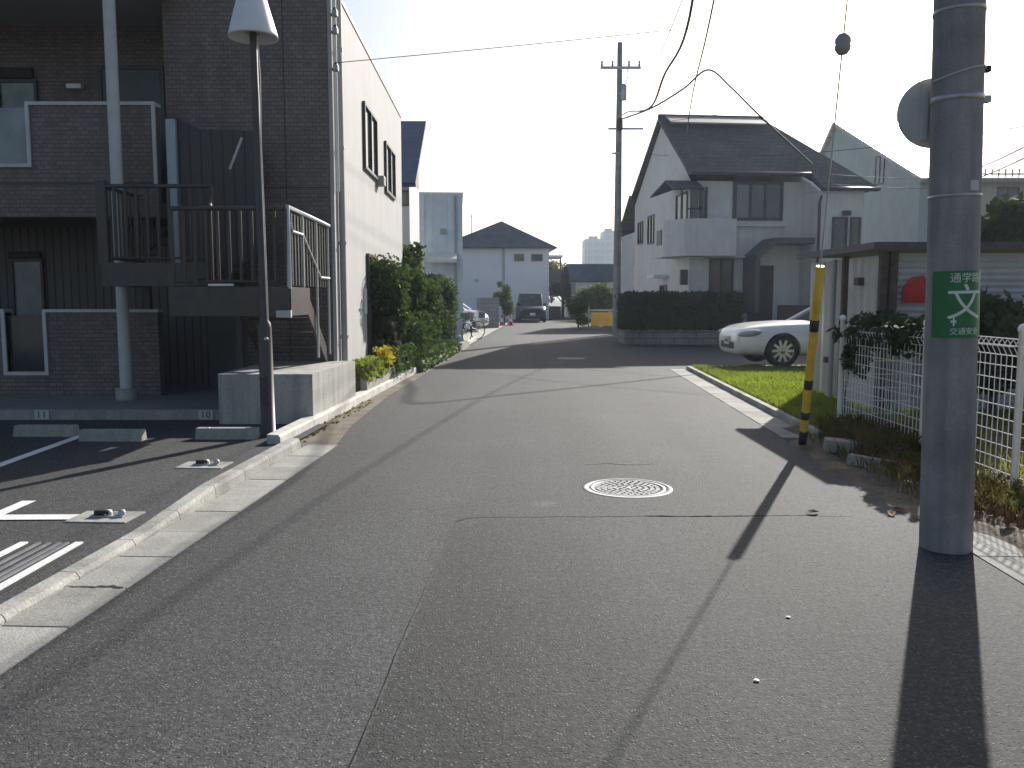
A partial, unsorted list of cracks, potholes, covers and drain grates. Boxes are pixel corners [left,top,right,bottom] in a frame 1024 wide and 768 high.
manhole cover [582,478,673,498]
